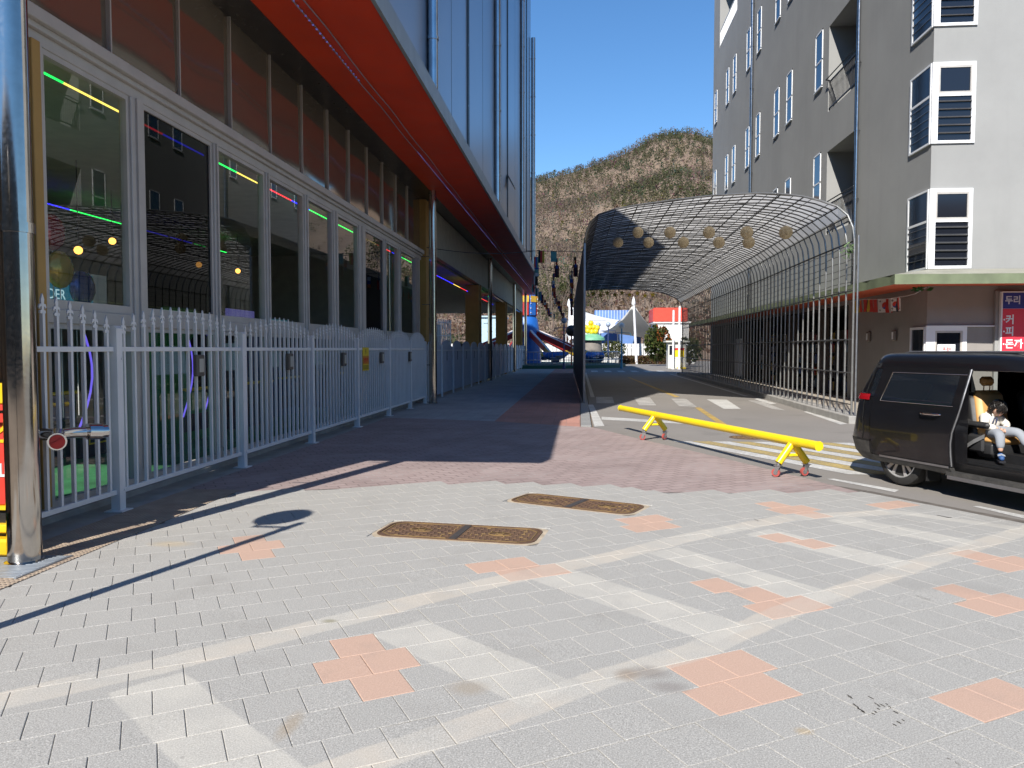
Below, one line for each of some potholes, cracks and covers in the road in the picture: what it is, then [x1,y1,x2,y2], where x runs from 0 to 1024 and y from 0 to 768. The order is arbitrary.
manhole cover [507,493,650,516]
manhole cover [372,521,548,546]
